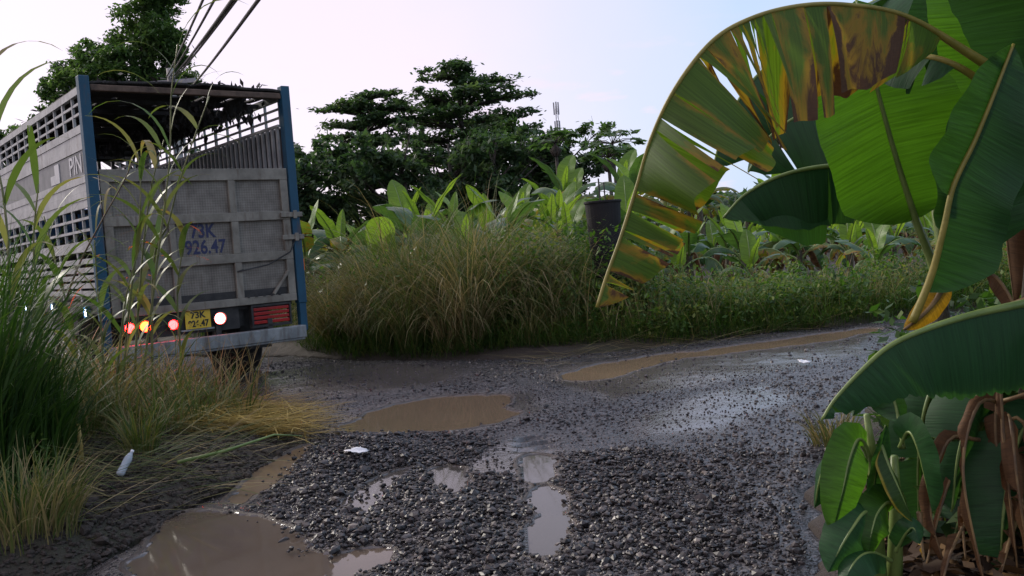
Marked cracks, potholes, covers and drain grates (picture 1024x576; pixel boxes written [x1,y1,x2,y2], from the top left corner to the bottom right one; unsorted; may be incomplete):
pothole [425,463,475,495]
pothole [333,393,527,434]
pothole [556,327,885,382]
pothole [513,452,563,486]
pothole [118,507,402,576]
pothole [335,465,415,513]
pothole [517,482,576,560]
